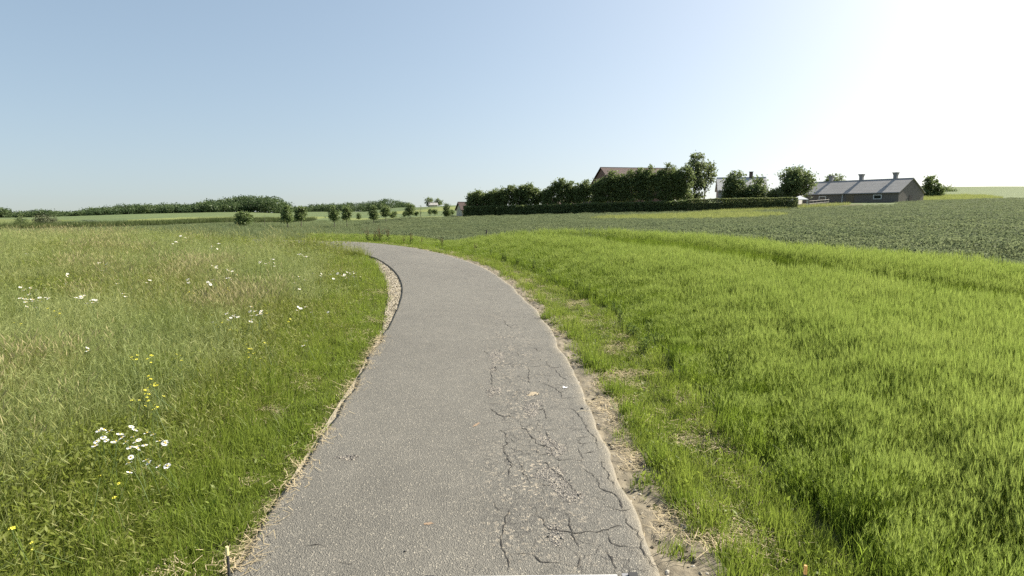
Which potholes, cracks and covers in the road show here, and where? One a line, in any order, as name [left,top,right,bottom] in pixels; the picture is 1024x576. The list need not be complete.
crack [490,348,659,571]
